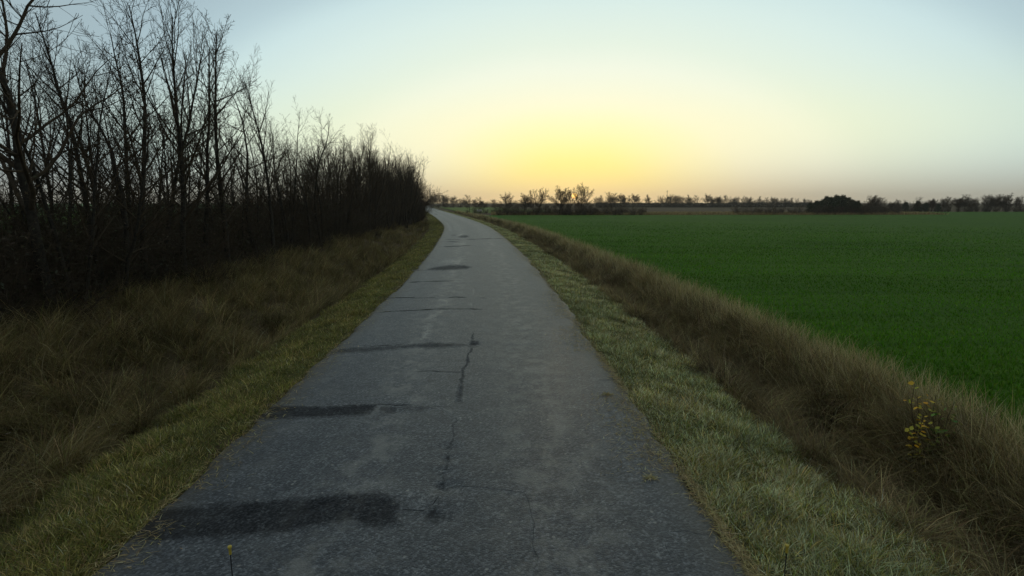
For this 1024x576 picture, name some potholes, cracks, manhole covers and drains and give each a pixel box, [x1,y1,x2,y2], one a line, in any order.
crack [415,331,475,384]
crack [403,486,539,575]
